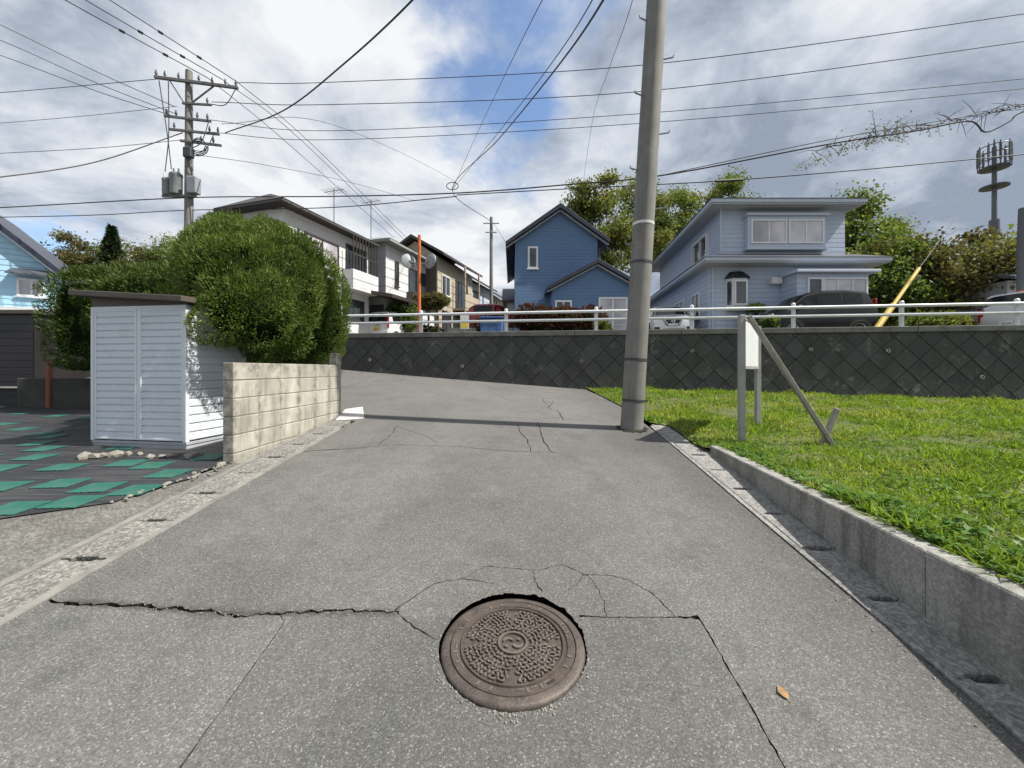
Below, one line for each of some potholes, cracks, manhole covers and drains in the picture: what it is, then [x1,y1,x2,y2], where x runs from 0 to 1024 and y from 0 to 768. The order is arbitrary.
crack [49,564,786,768]
manhole cover [439,599,587,713]
crack [304,392,564,454]
